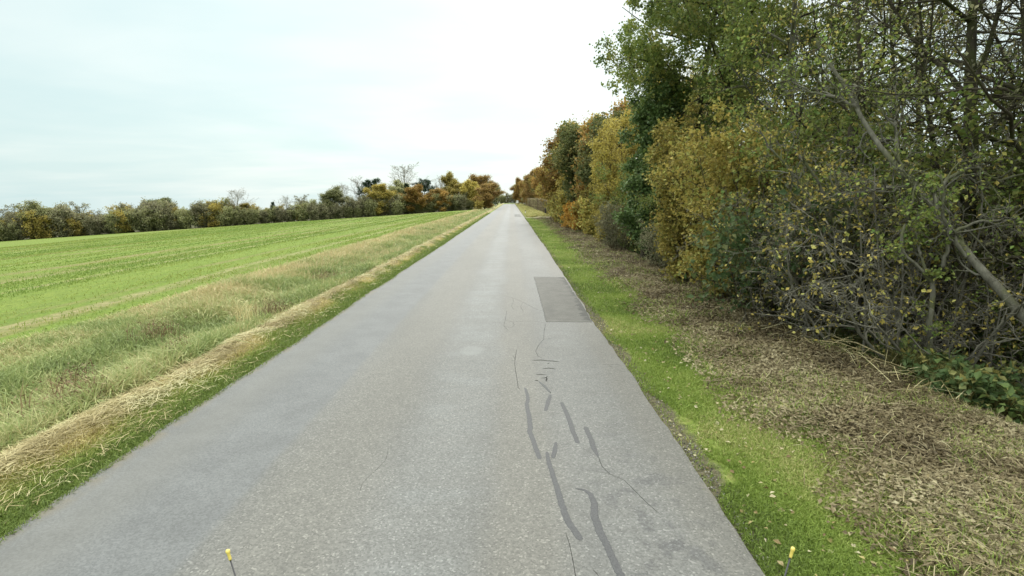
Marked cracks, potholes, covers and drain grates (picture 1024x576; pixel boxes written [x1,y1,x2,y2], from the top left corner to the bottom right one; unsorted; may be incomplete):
crack [498,296,558,381]
